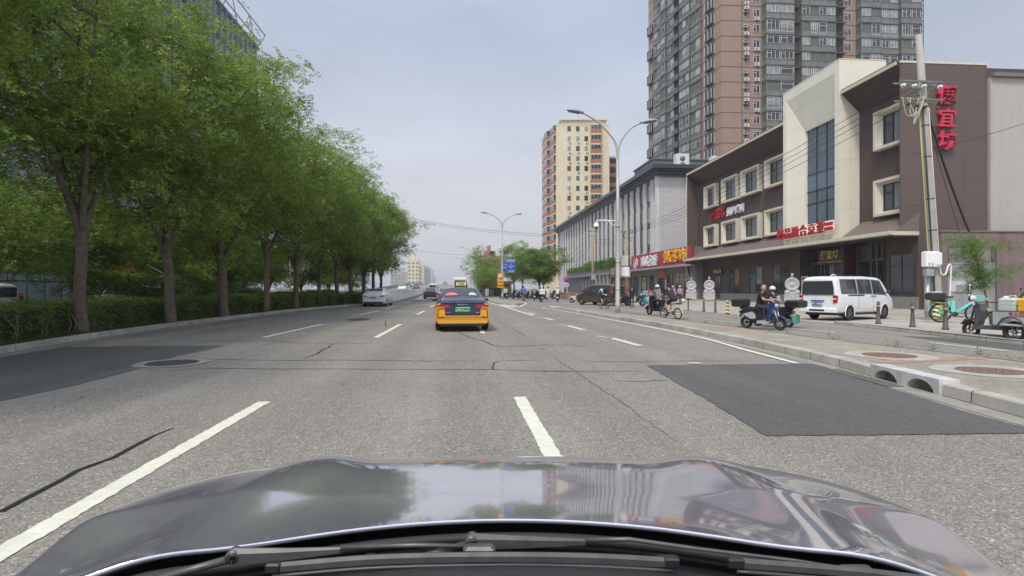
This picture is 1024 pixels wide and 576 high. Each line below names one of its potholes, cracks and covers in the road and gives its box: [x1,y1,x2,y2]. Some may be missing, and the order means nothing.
manhole cover [132,358,212,368]
crack [274,321,389,359]
manhole cover [843,351,939,360]
manhole cover [929,364,1024,378]
